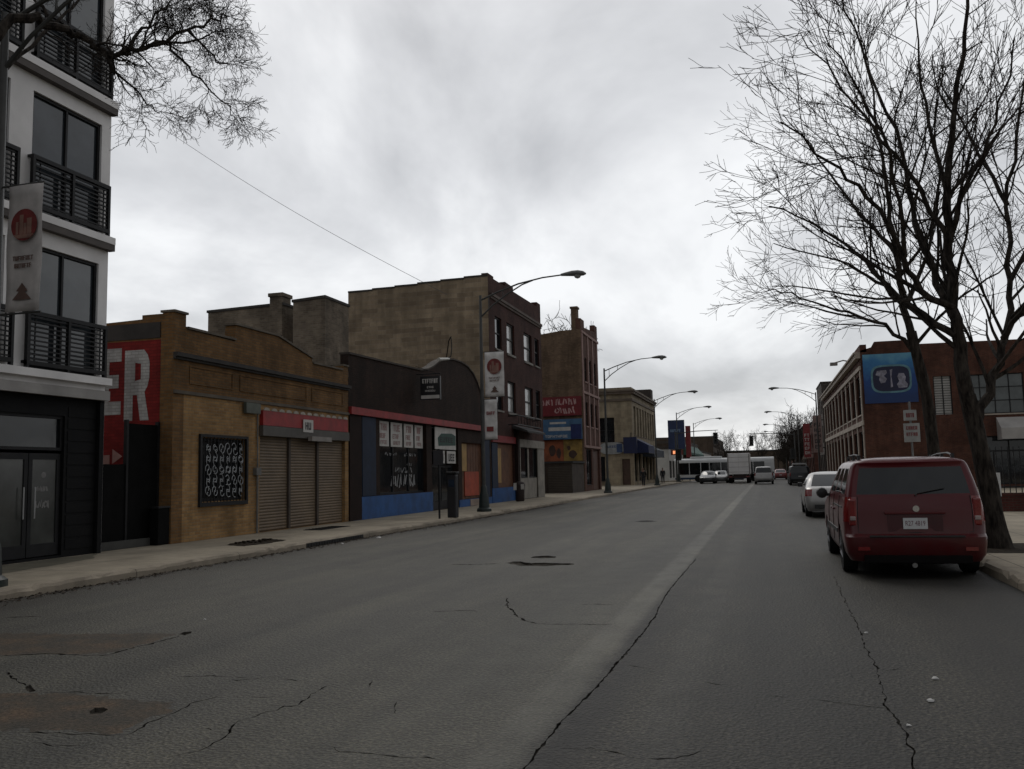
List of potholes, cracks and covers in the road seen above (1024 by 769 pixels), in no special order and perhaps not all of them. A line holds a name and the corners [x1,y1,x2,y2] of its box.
crack [175,675,330,756]
crack [19,696,218,746]
crack [523,560,705,769]
crack [814,581,916,769]
crack [506,598,608,625]
